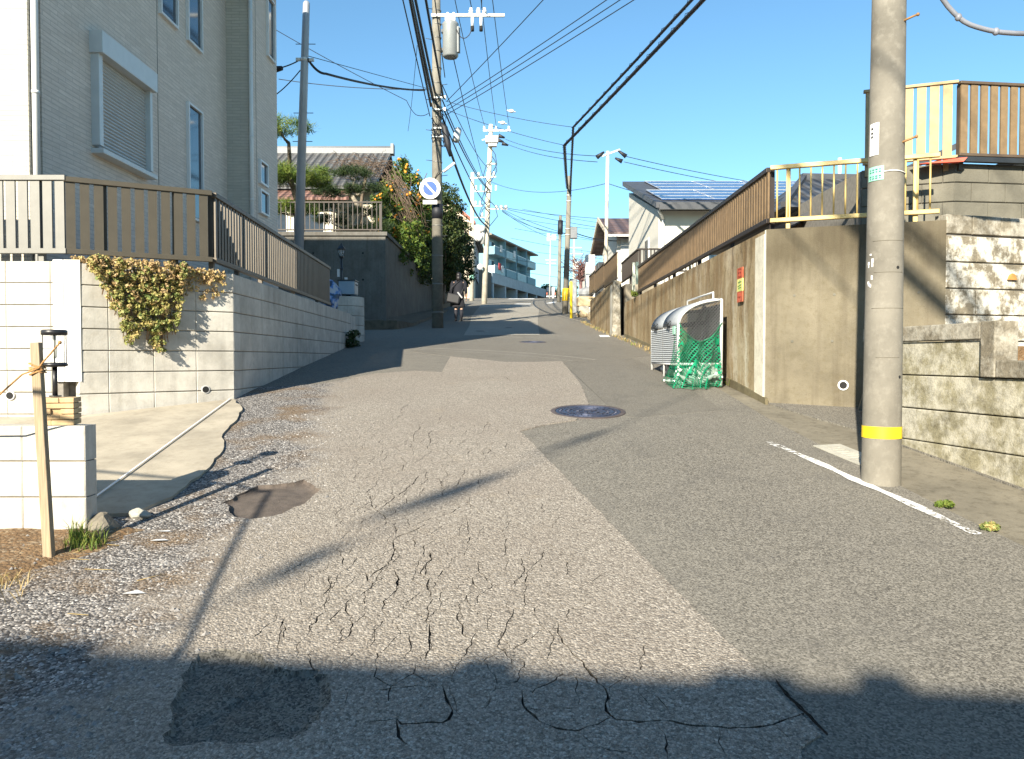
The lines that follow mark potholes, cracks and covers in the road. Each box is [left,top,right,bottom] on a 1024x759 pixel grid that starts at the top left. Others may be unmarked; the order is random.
crack [256,417,828,759]
manhole cover [551,404,626,419]
